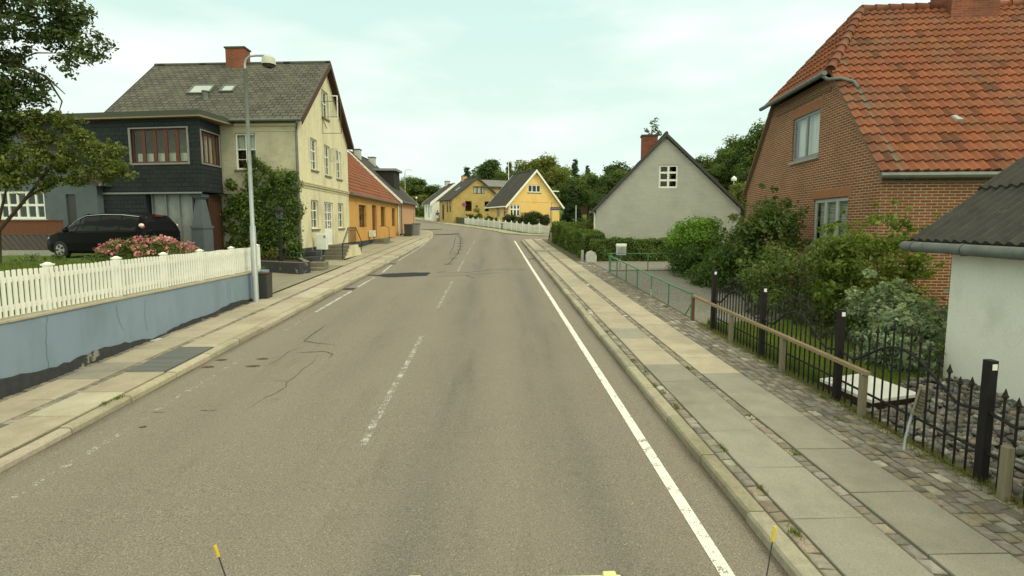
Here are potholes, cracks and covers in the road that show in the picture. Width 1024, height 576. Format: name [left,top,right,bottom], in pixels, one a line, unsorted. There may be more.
crack [437,235,522,278]
